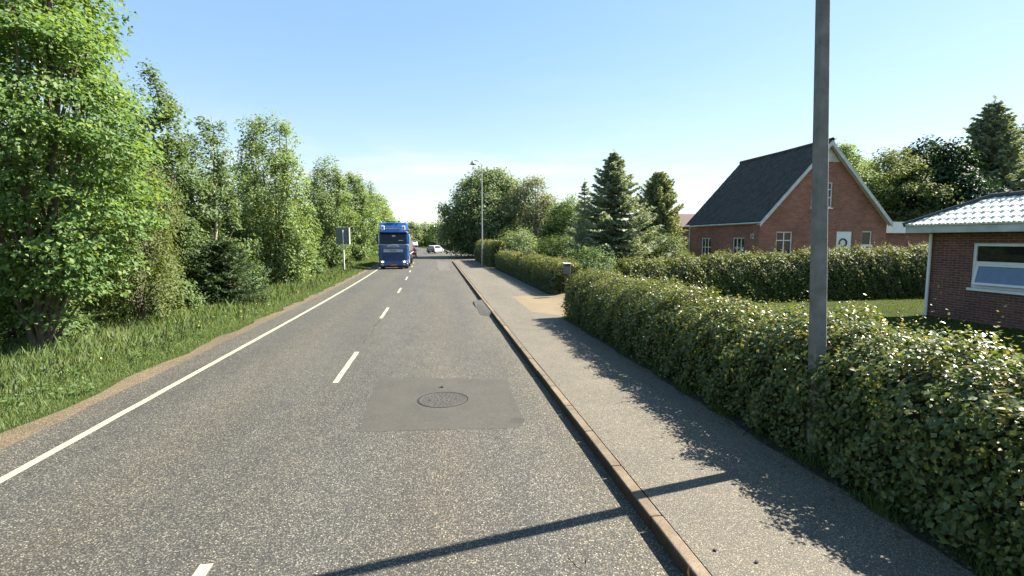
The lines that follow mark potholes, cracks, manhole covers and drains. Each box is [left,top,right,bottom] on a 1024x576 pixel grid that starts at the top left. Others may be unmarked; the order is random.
manhole cover [417,392,468,408]
